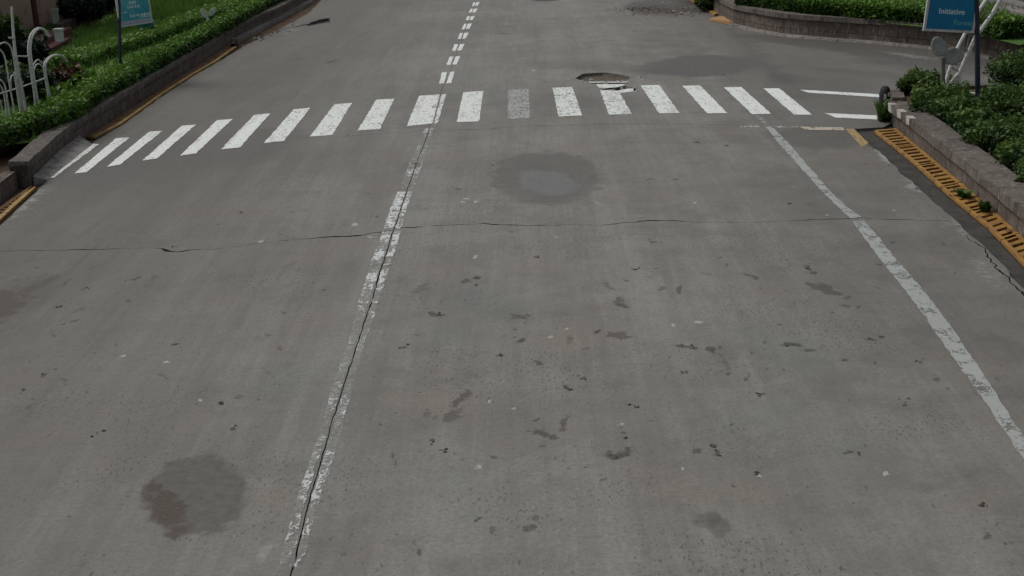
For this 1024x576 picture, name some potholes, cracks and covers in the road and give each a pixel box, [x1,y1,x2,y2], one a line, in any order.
drain grate [970,209,1019,242]
crack [290,0,476,576]
drain grate [874,128,914,149]
drain grate [895,144,936,167]
crack [966,236,1024,296]
drain grate [1001,234,1024,267]
pothole [576,73,630,81]
crack [20,217,923,252]
drain grate [917,162,961,189]
drain grate [941,183,981,214]
